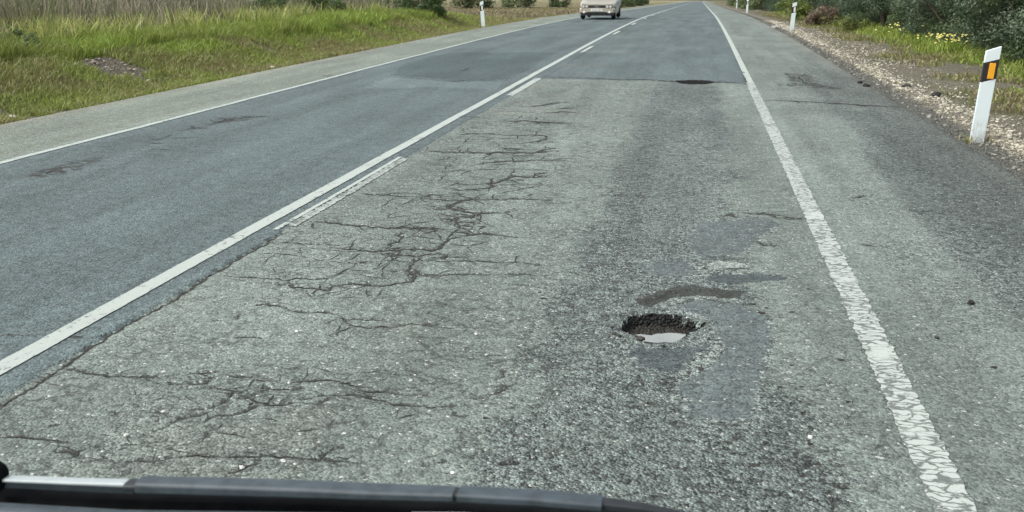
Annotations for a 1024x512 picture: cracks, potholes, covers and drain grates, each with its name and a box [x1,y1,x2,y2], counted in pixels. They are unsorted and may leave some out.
crack [1,102,575,476]
pothole [621,313,706,344]
